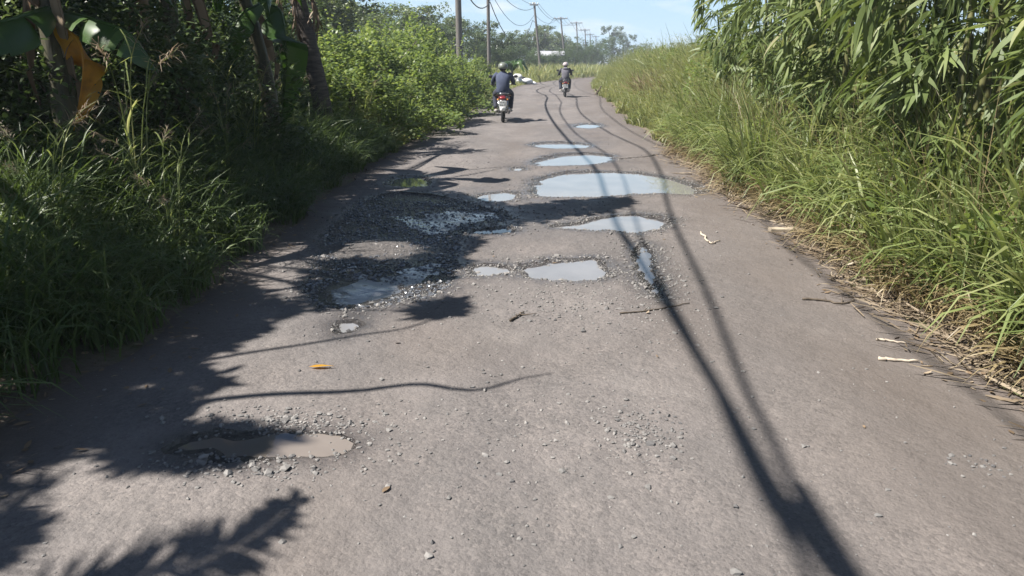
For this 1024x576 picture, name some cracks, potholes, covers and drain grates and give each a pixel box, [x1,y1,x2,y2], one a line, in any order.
pothole [382,175,433,186]
pothole [631,242,667,299]
pothole [159,428,358,464]
pothole [330,319,367,334]
pothole [549,213,676,233]
pothole [301,191,514,311]
pothole [472,191,522,200]
pothole [530,152,615,166]
pothole [516,256,612,281]
pothole [526,170,704,197]
